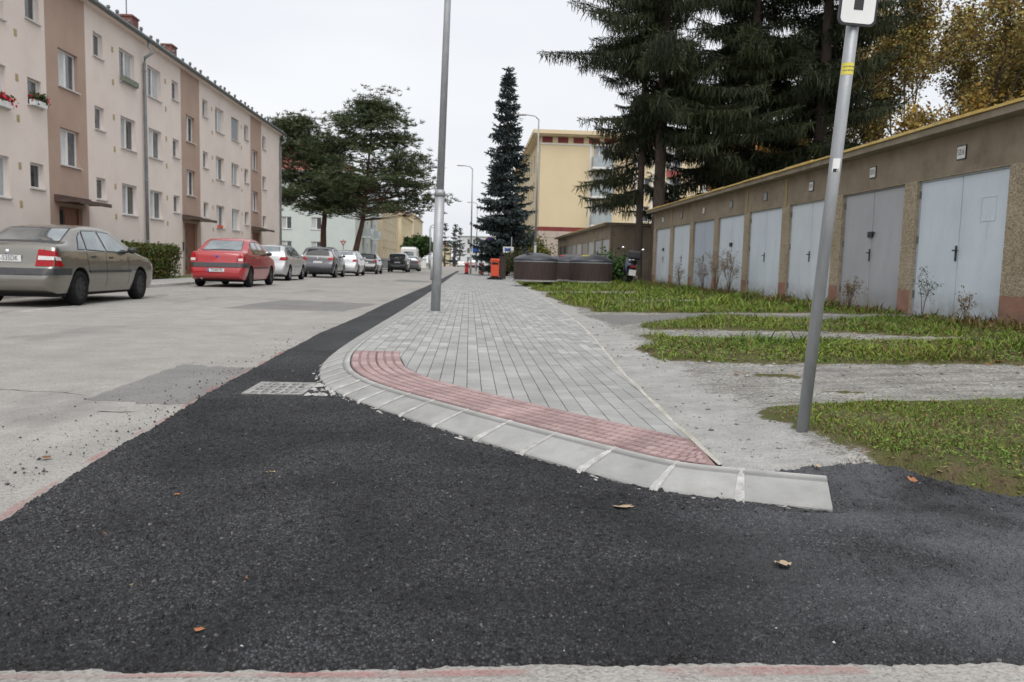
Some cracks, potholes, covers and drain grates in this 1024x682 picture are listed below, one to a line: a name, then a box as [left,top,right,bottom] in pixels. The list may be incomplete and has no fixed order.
drain grate [241,382,317,395]
